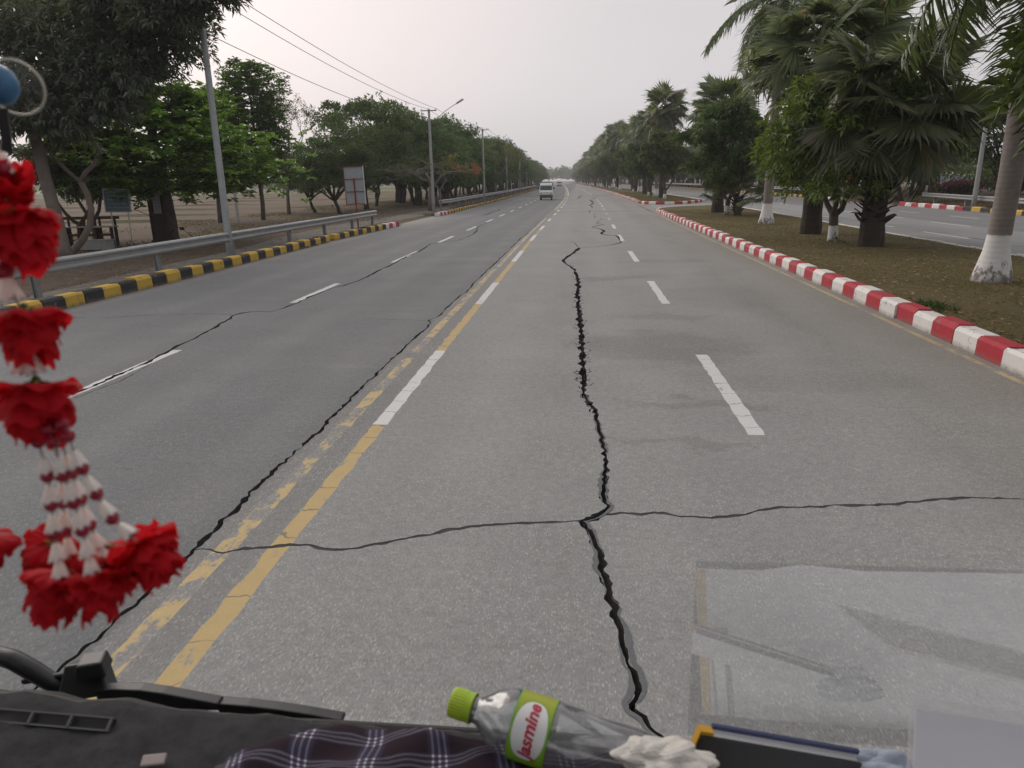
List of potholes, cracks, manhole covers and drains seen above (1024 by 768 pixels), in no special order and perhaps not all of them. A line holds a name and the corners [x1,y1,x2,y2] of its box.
crack [33,196,1019,738]
